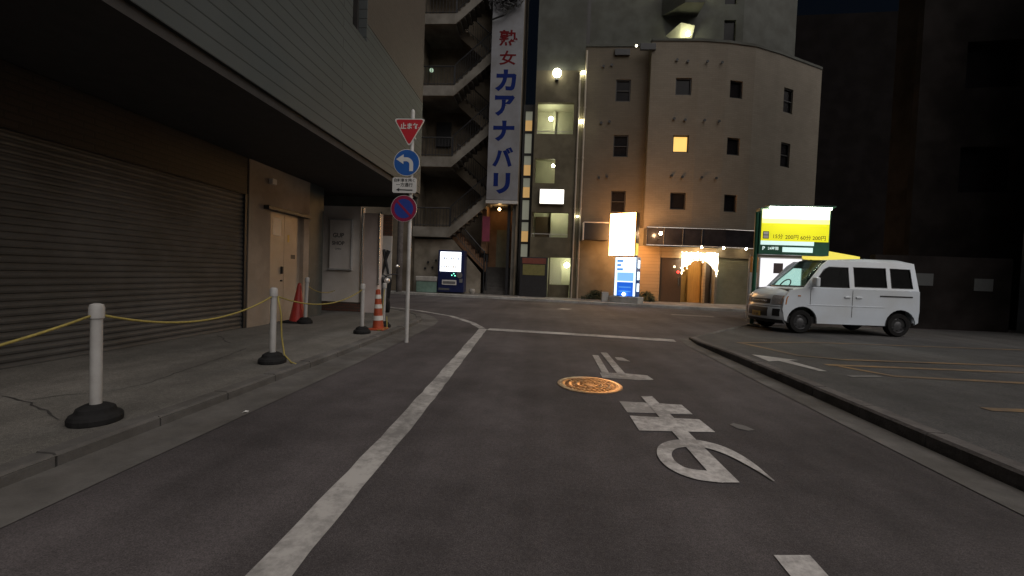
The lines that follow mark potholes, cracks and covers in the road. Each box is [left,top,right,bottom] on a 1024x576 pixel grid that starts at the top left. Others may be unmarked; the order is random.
crack [5,394,70,420]
manhole cover [557,377,623,394]
